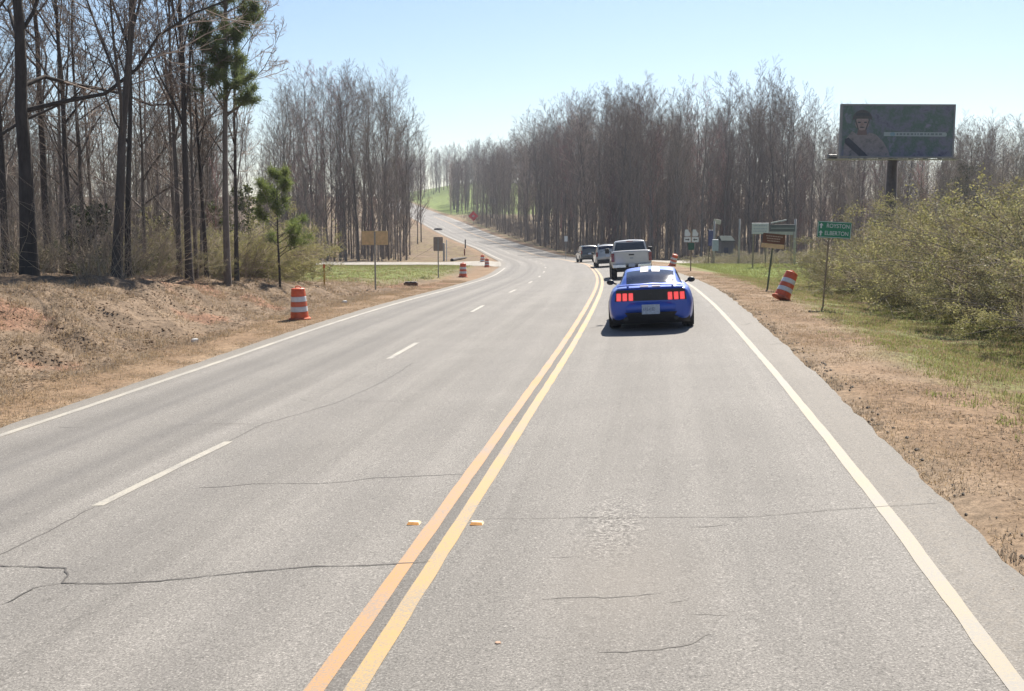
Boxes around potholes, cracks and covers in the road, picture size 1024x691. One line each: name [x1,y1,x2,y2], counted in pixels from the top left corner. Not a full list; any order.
crack [547,501,946,527]
crack [612,634,708,652]
crack [202,474,452,488]
crack [548,583,688,603]
crack [0,509,427,605]
